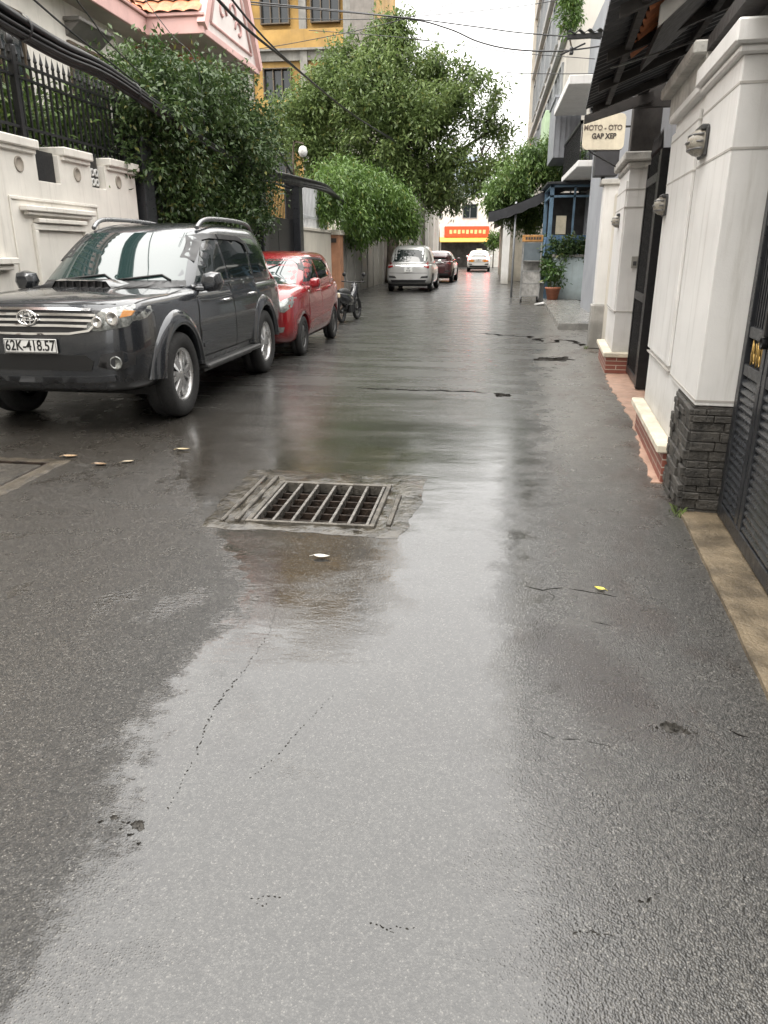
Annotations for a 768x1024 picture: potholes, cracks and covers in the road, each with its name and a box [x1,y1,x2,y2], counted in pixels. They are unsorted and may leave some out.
drain grate [201,469,428,539]
pothole [98,815,145,845]
crack [482,333,586,346]
pothole [655,721,698,734]
crack [167,610,276,809]
crack [527,586,616,601]
